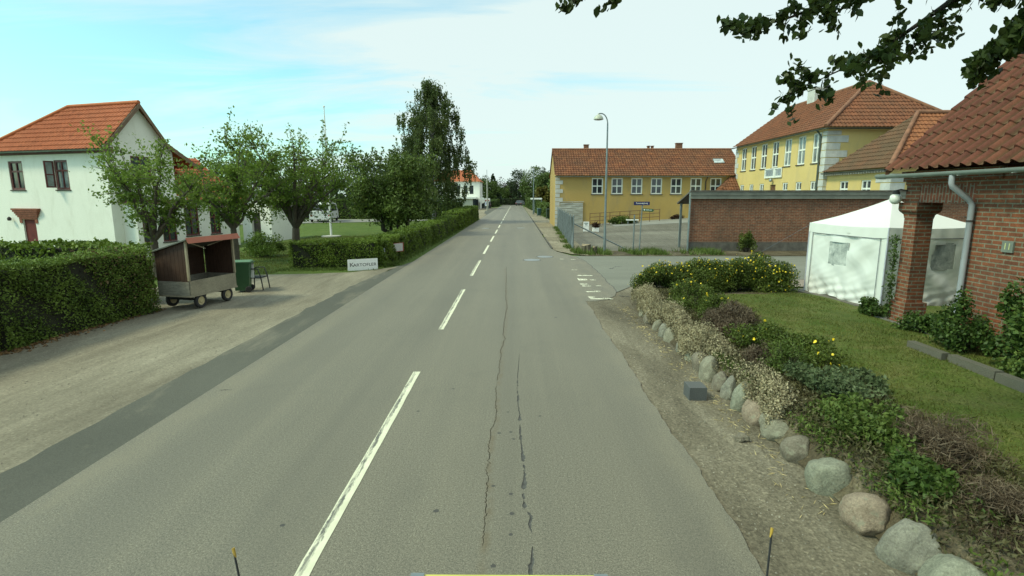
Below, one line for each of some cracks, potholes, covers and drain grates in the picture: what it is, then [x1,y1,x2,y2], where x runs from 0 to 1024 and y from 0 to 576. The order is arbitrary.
crack [482,267,534,575]
